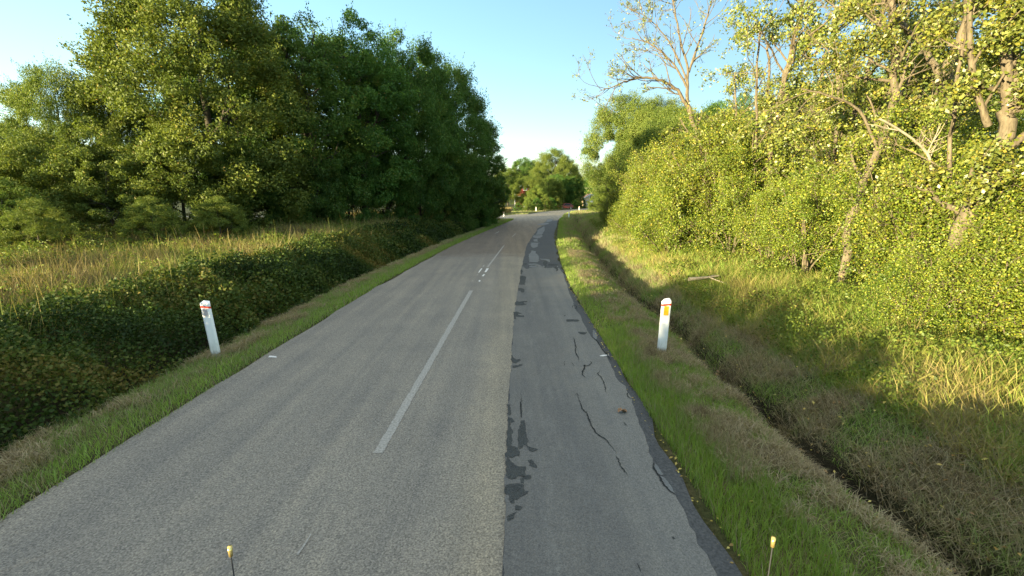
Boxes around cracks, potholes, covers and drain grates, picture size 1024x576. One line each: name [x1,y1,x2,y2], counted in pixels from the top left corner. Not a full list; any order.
crack [577,394,626,472]
crack [564,338,610,392]
